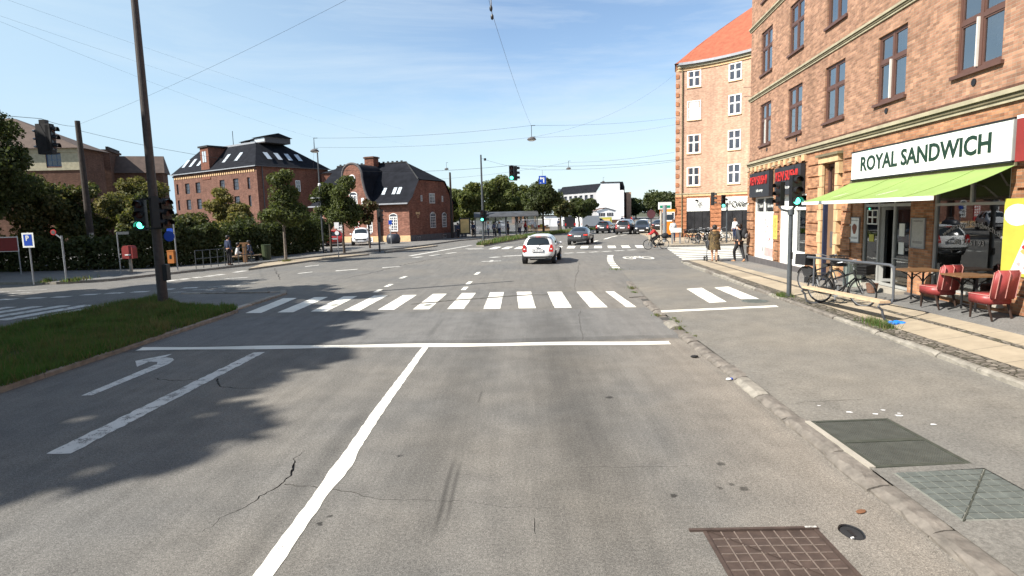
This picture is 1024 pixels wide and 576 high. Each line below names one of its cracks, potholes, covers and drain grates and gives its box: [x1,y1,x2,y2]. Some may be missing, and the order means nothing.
manhole cover [838,524,866,540]
crack [203,451,539,531]
